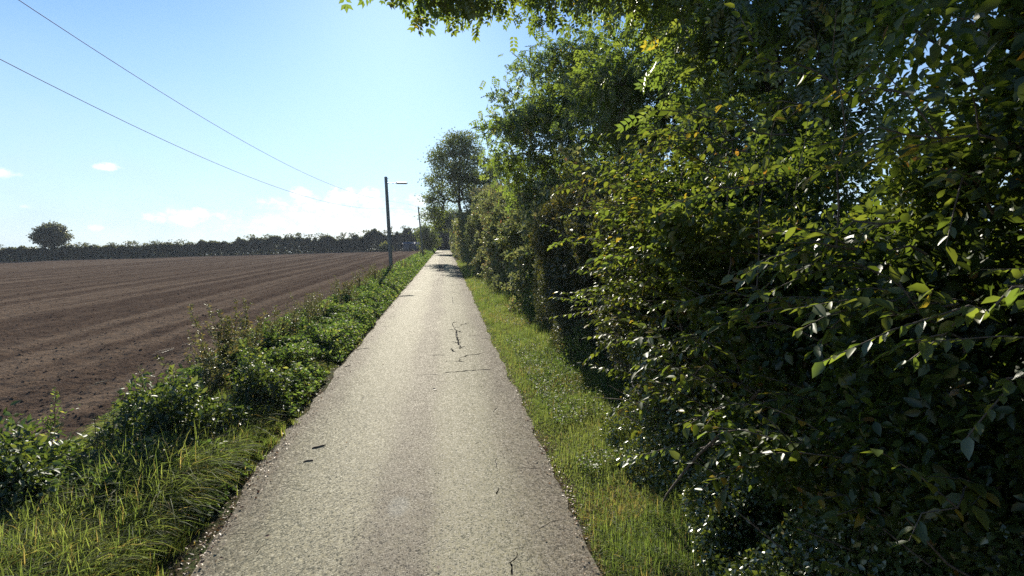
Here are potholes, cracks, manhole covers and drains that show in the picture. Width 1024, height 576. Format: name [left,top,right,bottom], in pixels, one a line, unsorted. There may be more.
crack [425,322,491,375]
